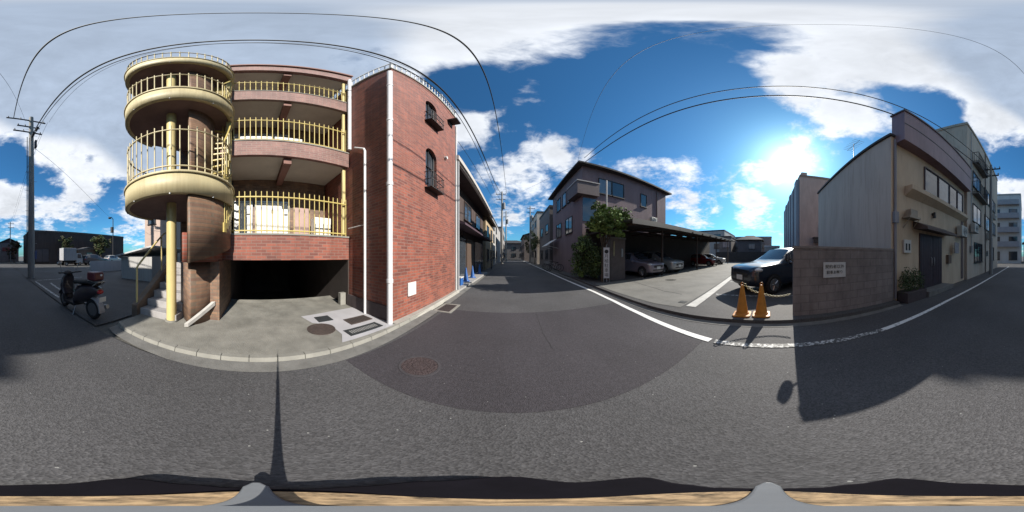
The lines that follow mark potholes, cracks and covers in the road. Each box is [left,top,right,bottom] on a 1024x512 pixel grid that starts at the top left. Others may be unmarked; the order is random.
manhole cover [398,356,441,377]
drain grate [343,322,383,336]
drain grate [434,303,460,313]
manhole cover [307,323,335,335]
